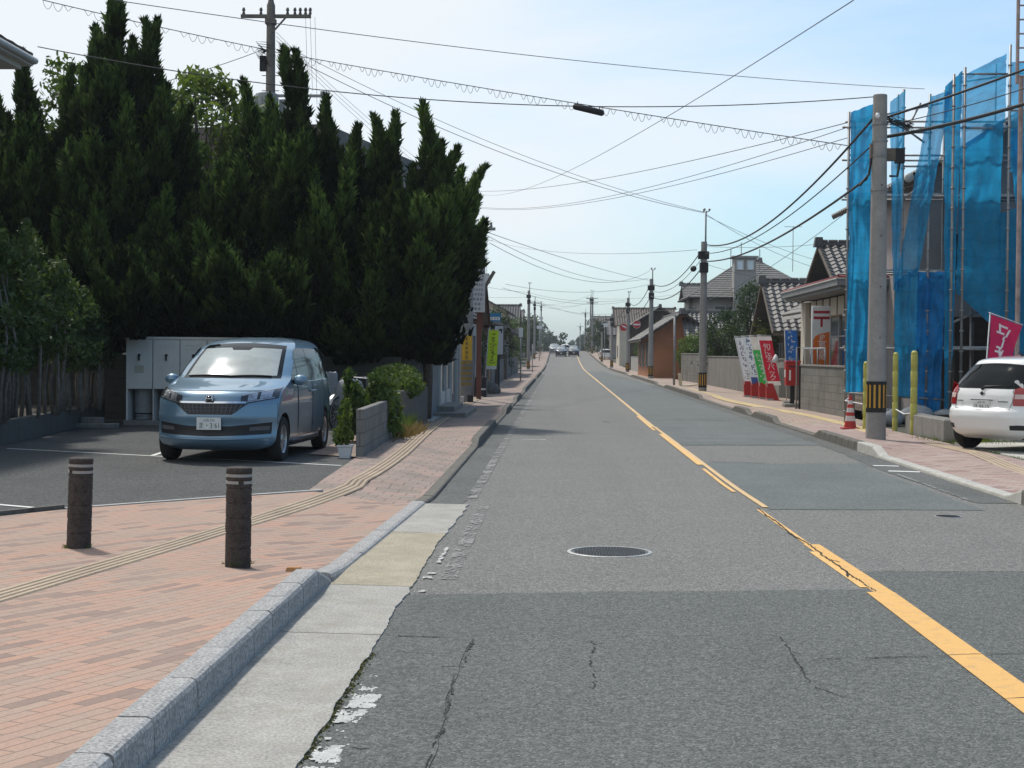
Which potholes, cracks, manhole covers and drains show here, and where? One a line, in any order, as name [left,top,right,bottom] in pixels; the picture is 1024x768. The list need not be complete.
crack [758,507,876,591]
crack [588,640,597,689]
crack [379,635,474,768]
manhole cover [567,546,653,558]
crack [622,634,1019,698]
